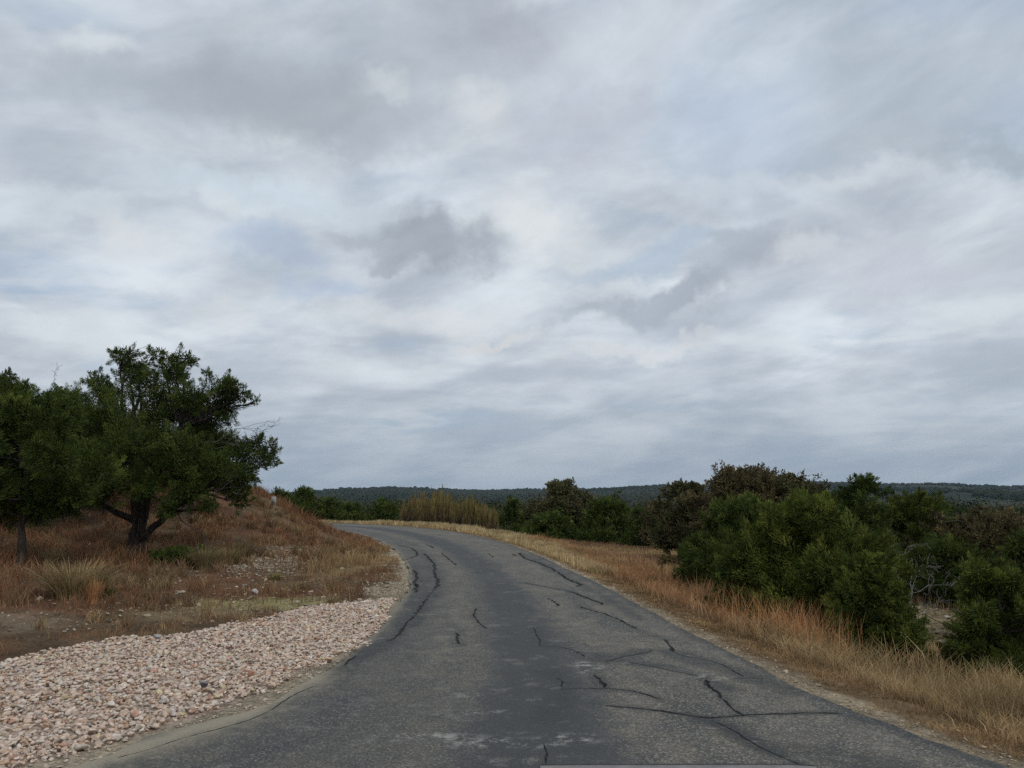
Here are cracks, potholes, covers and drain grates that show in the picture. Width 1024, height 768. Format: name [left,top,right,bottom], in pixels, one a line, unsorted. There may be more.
crack [387,544,457,641]
crack [455,609,486,644]
crack [513,553,836,764]
